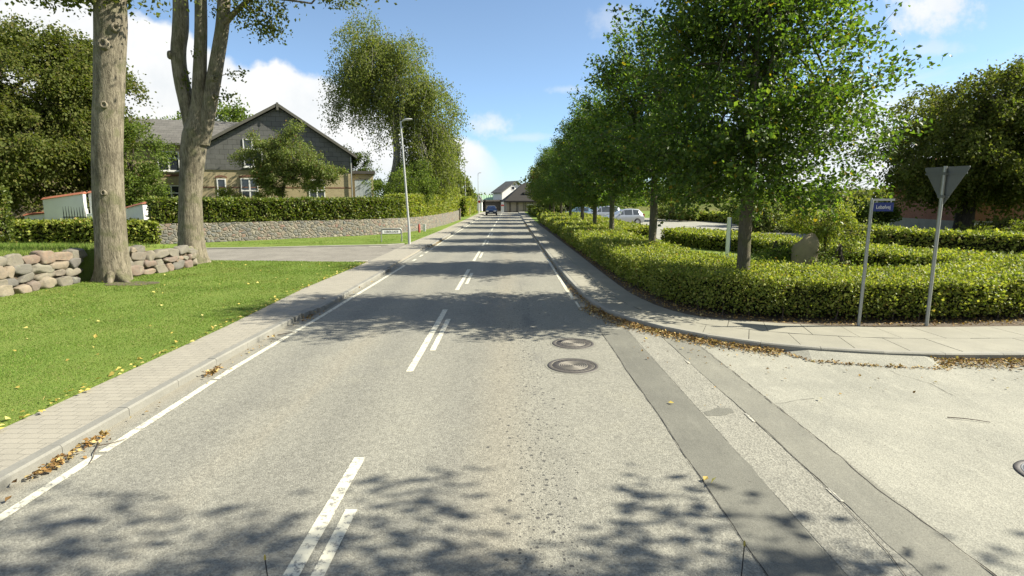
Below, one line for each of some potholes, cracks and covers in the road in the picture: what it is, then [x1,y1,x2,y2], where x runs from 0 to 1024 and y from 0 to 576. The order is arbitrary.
manhole cover [548,358,598,373]
manhole cover [1013,460,1024,477]
manhole cover [552,338,594,349]
